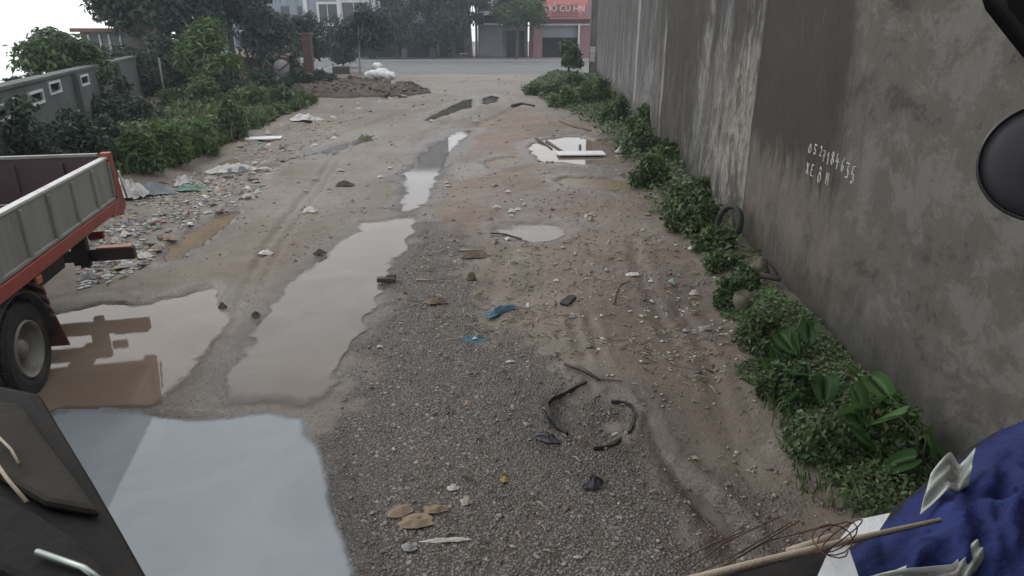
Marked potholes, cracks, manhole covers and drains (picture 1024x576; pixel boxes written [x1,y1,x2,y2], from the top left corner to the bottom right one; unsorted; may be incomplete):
pothole [476,93,505,105]
pothole [478,155,526,170]
pothole [522,134,635,166]
pothole [418,96,478,122]
pothole [481,216,579,245]
pothole [548,174,639,192]
